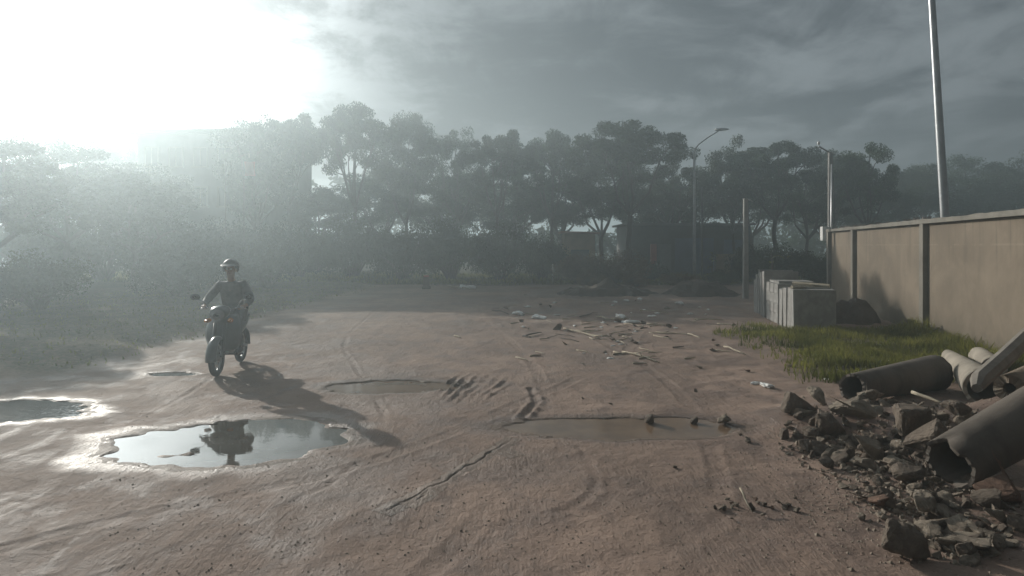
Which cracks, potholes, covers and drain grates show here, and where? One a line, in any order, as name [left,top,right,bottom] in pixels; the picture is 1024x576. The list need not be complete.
pothole [485,416,757,442]
crack [372,436,526,516]
pothole [0,398,98,424]
pothole [88,415,367,472]
pothole [316,379,473,395]
